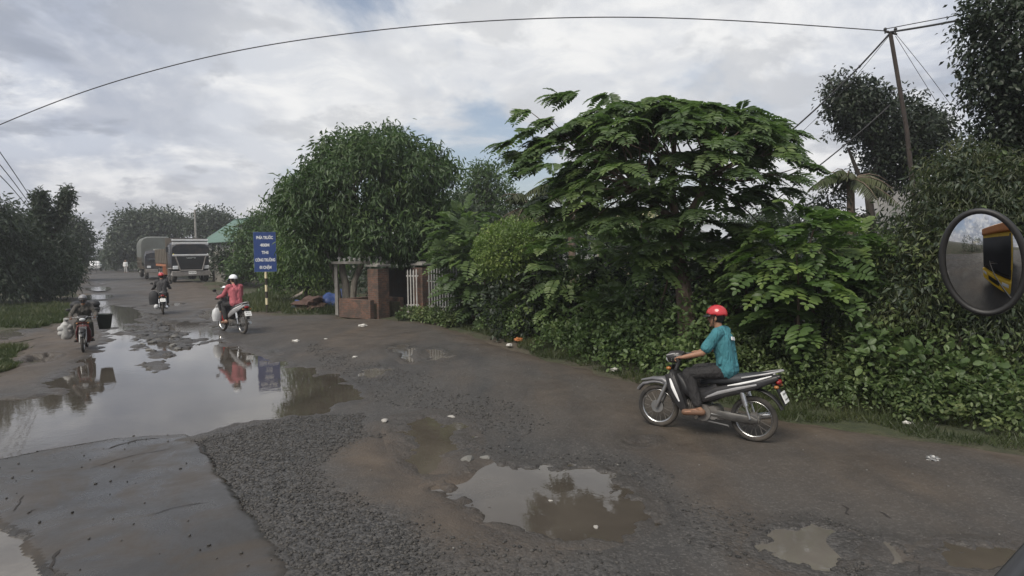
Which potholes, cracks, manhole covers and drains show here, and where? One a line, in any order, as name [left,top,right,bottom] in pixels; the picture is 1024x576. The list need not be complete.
pothole [742,517,895,576]
pothole [0,305,374,459]
pothole [410,346,457,362]
pothole [384,343,431,365]
pothole [418,448,668,551]
